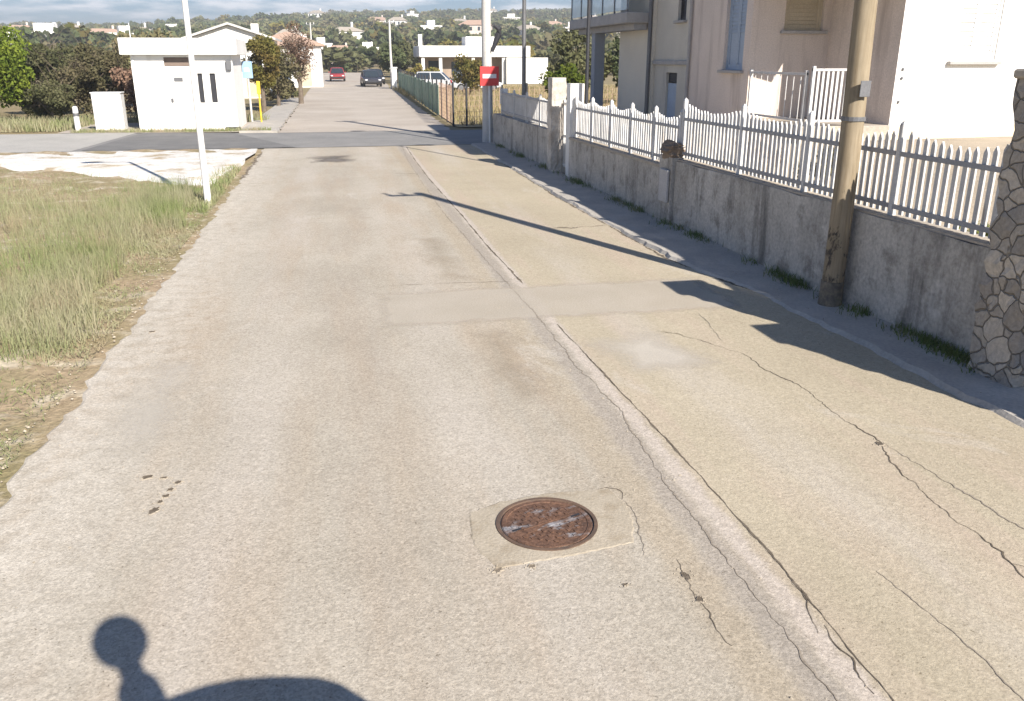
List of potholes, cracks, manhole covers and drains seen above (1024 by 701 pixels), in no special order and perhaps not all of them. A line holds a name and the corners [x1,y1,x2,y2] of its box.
crack [878,572,1024,700]
crack [600,487,645,553]
crack [677,560,731,645]
manhole cover [496,497,598,551]
crack [661,331,1024,577]
